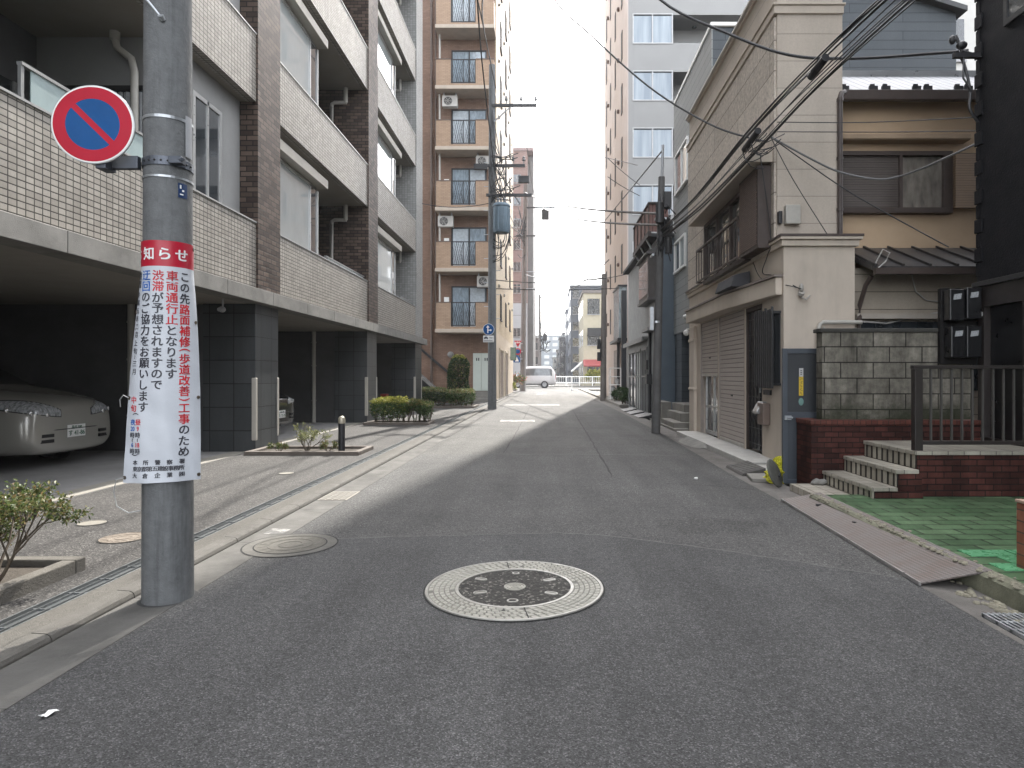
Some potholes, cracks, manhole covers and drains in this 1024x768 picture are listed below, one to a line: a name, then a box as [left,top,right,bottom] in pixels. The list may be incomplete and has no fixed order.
manhole cover [96,532,141,544]
crack [572,409,612,477]
manhole cover [240,533,339,558]
drain grate [982,613,1024,640]
manhole cover [423,561,605,622]
